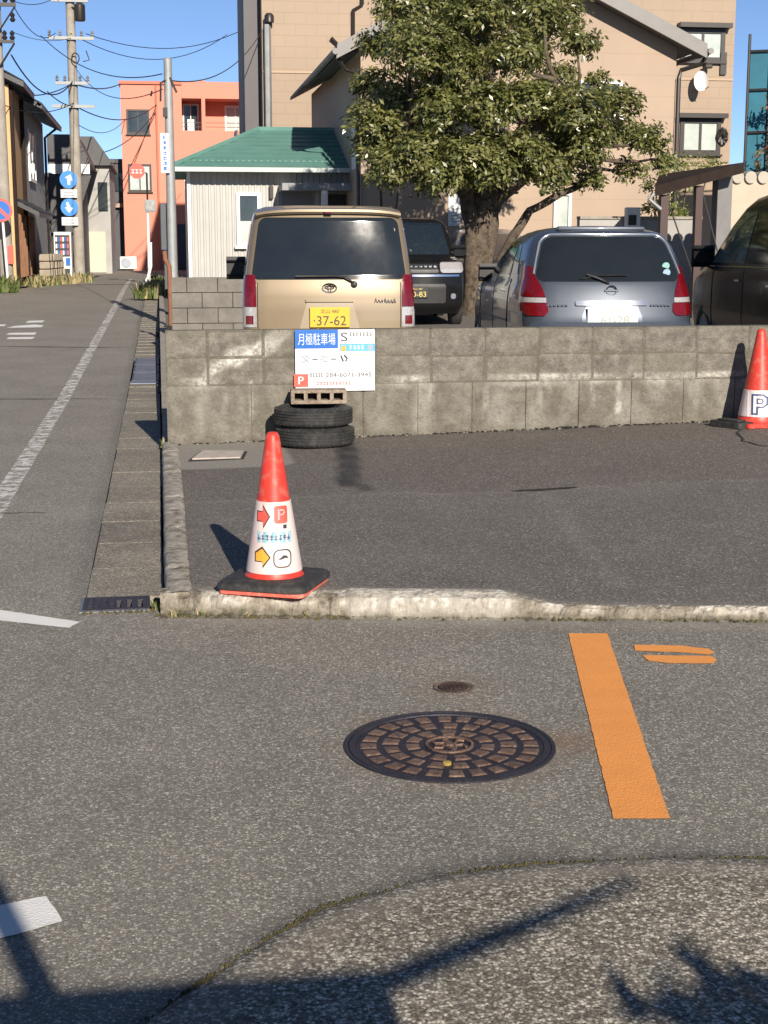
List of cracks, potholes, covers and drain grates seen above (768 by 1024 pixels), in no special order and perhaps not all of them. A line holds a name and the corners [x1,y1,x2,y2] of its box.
drain grate [130,358,159,384]
utility cover [434,681,474,693]
manhole cover [344,711,556,784]
